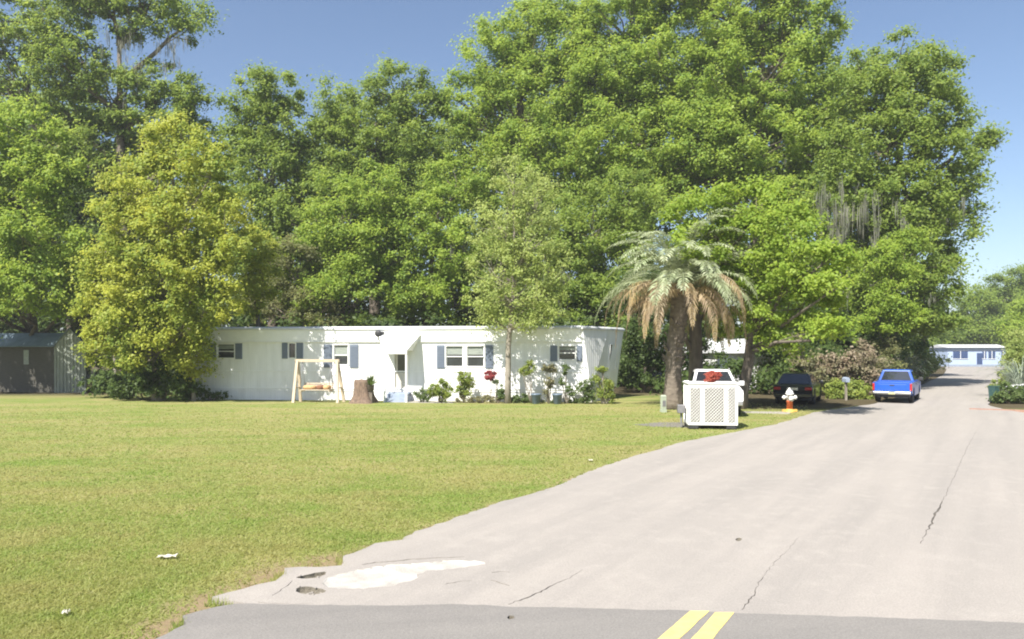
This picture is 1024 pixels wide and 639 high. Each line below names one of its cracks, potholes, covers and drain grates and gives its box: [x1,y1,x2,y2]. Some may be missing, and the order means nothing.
pothole [296,586,326,595]
crack [741,539,797,610]
crack [920,431,976,544]
crack [491,571,579,604]
